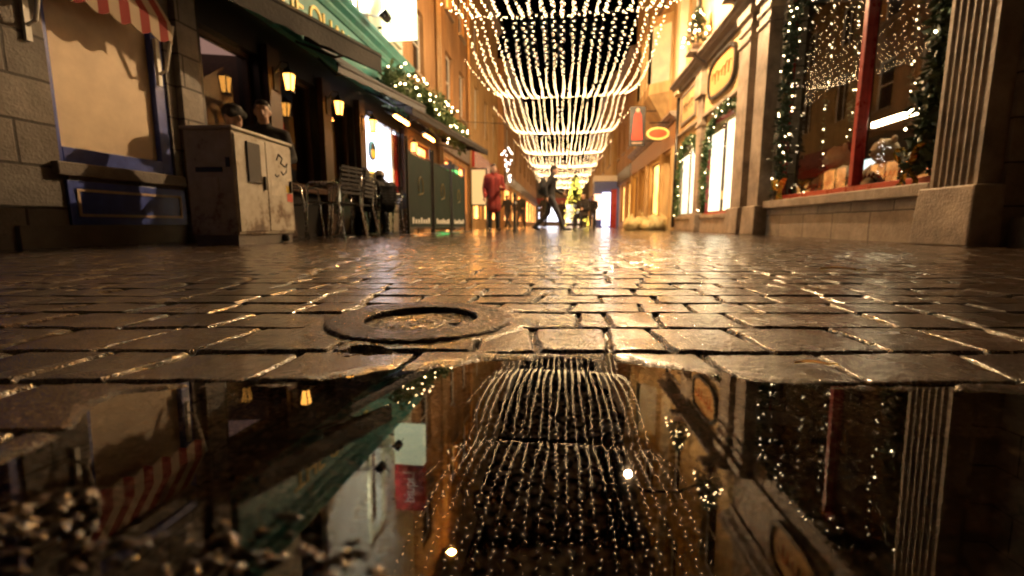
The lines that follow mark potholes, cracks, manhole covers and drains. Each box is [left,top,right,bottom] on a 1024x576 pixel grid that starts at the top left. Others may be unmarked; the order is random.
manhole cover [323,302,513,344]
